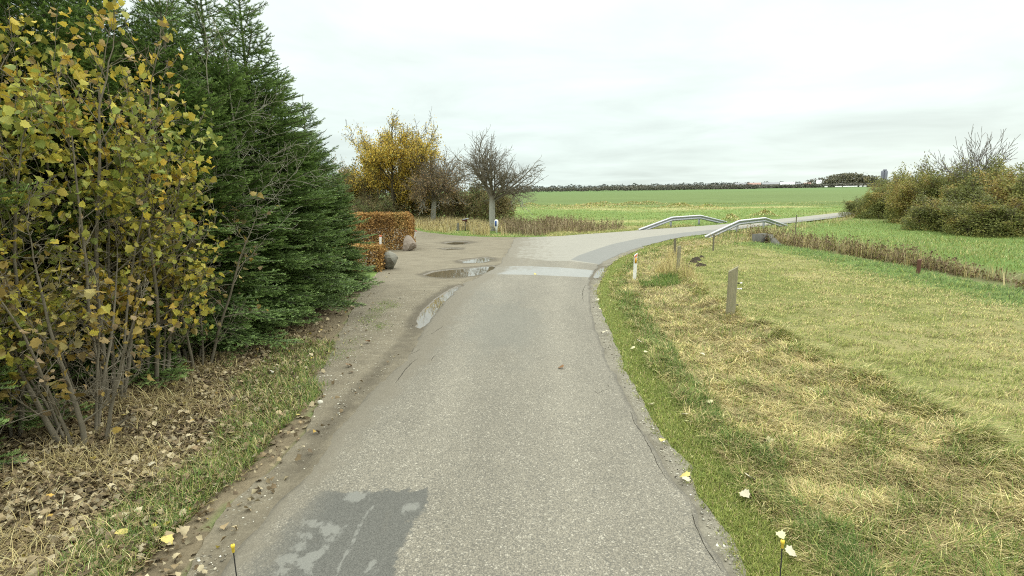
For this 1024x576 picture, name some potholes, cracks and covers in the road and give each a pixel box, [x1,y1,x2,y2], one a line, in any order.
pothole [423,265,495,278]
pothole [415,285,462,329]
